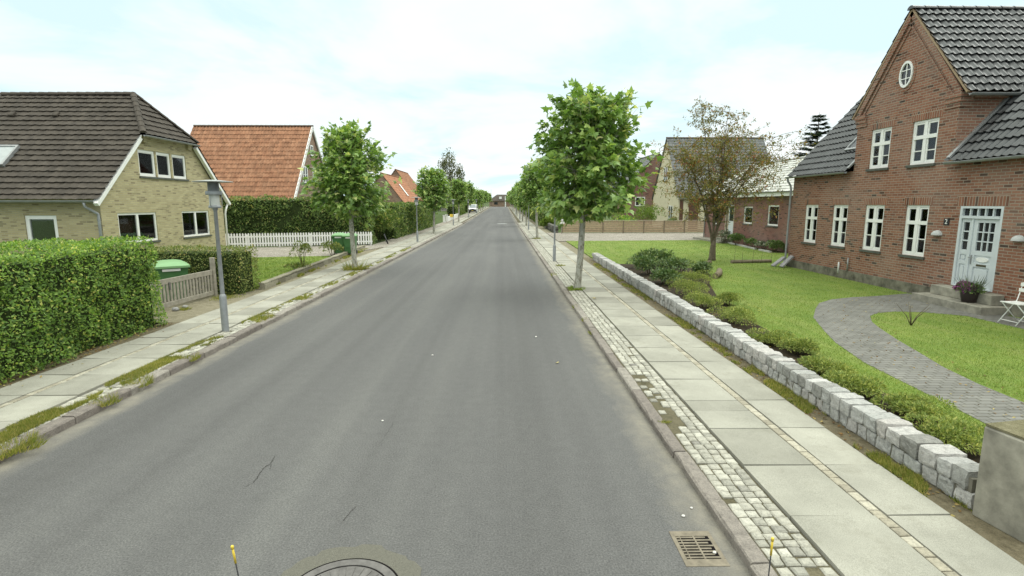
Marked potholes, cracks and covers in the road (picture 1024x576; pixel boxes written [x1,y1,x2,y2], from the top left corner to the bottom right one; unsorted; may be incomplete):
manhole cover [281,544,422,576]
drain grate [669,531,730,567]
